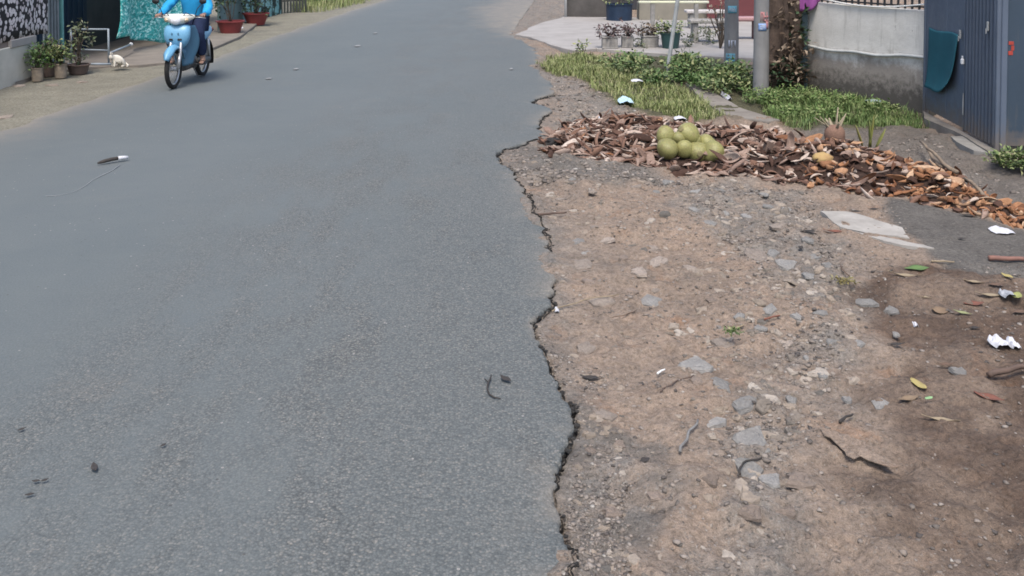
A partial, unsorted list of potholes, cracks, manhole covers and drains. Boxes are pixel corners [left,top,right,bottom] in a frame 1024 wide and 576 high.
crack [496,95,555,252]
crack [530,286,580,576]
